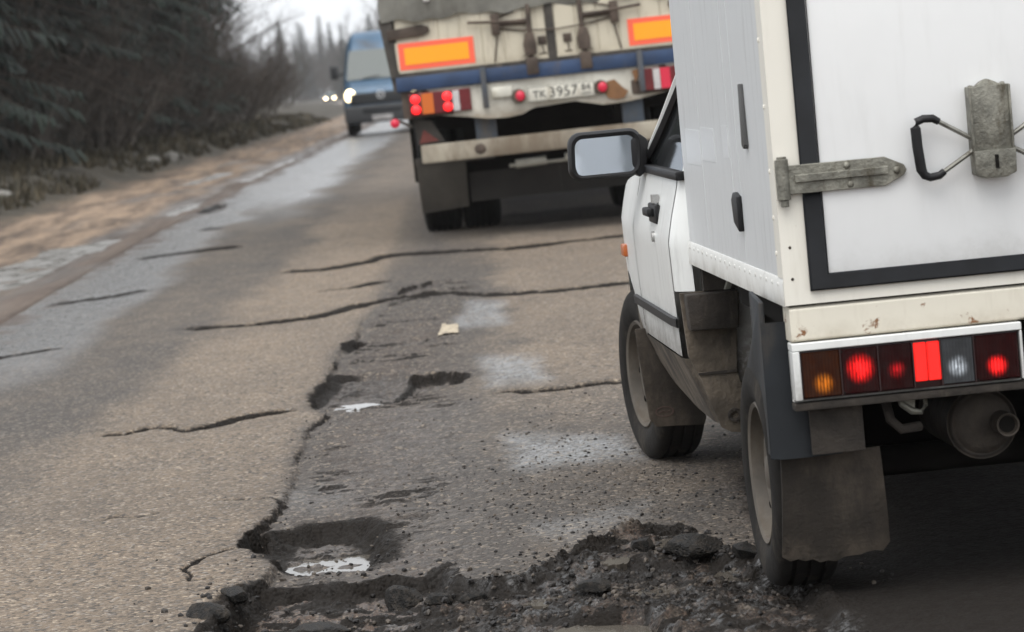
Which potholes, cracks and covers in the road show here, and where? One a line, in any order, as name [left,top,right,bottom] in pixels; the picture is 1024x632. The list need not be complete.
pothole [386,370,476,406]
crack [210,496,281,505]
pothole [302,370,412,415]
crack [120,226,247,261]
pothole [192,519,873,632]
crack [35,234,629,331]
crack [491,379,622,394]
pothole [333,338,370,356]
crack [0,346,71,360]
crack [93,408,305,437]
crack [178,547,237,582]
